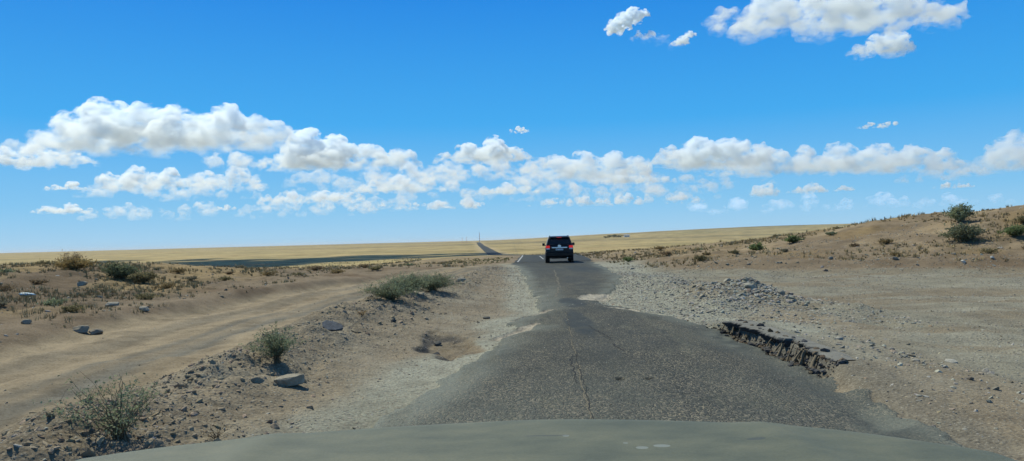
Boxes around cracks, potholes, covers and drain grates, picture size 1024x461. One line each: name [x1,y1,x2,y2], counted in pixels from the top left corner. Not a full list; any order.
crack [554,270,594,419]
